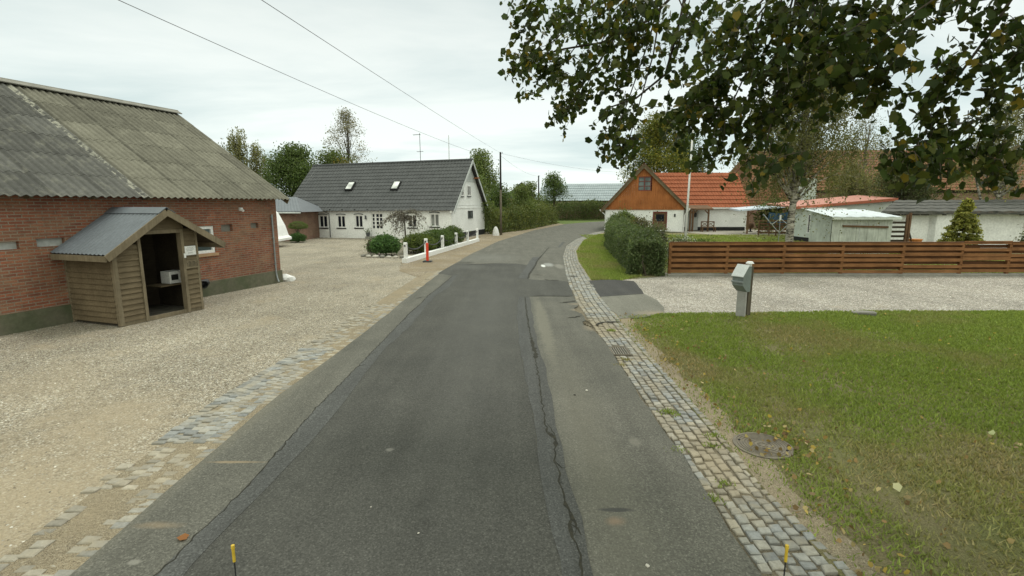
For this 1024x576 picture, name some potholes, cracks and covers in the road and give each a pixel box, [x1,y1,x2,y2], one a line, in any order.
drain grate [609,347,632,356]
crack [525,297,583,576]
manhole cover [733,432,794,460]
